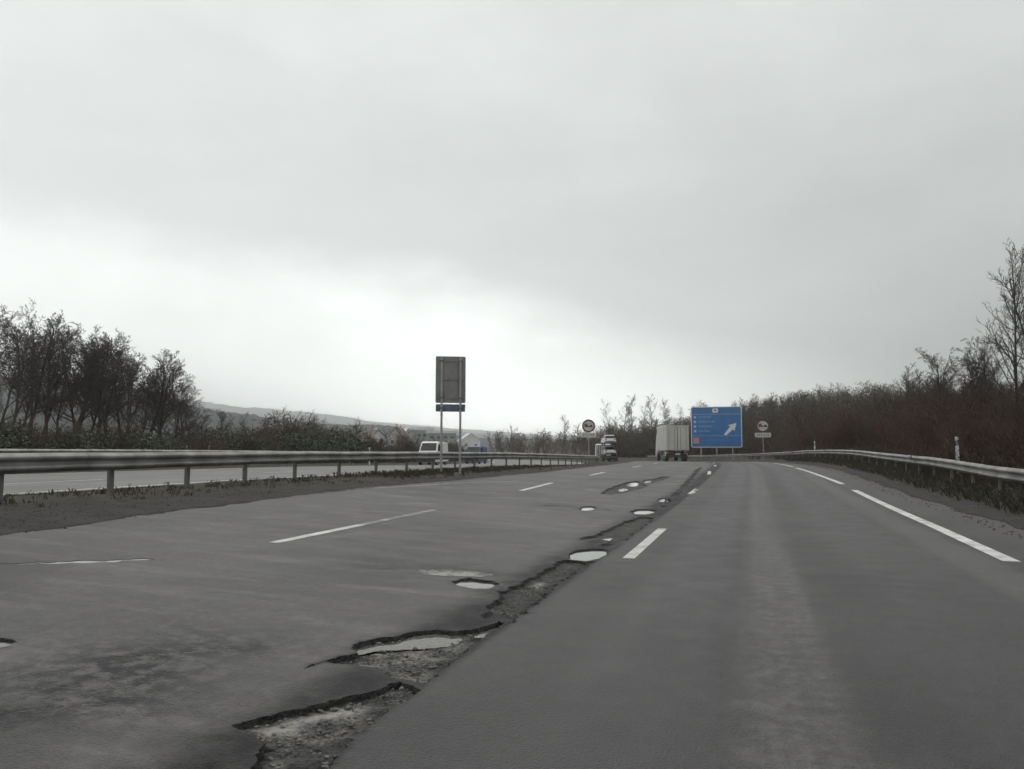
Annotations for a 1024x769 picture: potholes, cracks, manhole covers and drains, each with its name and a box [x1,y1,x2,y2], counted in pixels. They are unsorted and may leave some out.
pothole [0,638,16,648]
pothole [568,549,611,561]
pothole [660,467,701,509]
pothole [326,622,504,683]
pothole [481,559,596,625]
pothole [452,577,499,589]
pothole [231,682,421,769]
pothole [600,481,649,495]
